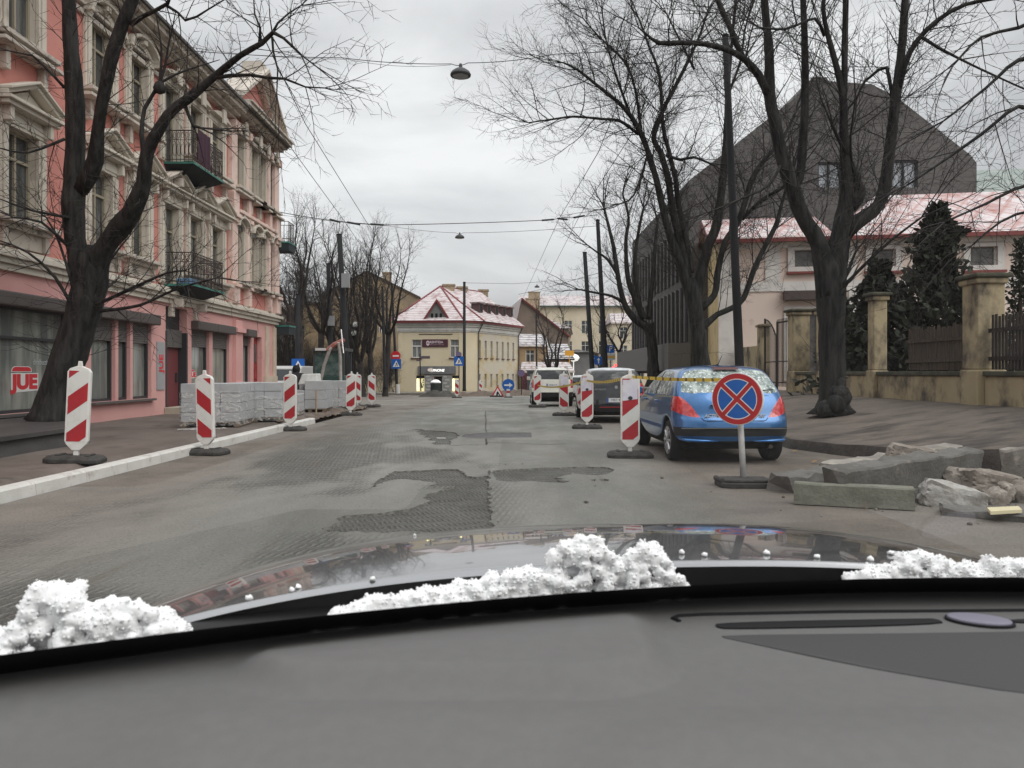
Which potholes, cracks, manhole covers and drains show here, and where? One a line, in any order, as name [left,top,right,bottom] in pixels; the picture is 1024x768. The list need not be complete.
pothole [322,469,495,533]
pothole [412,429,459,445]
pothole [492,467,614,483]
